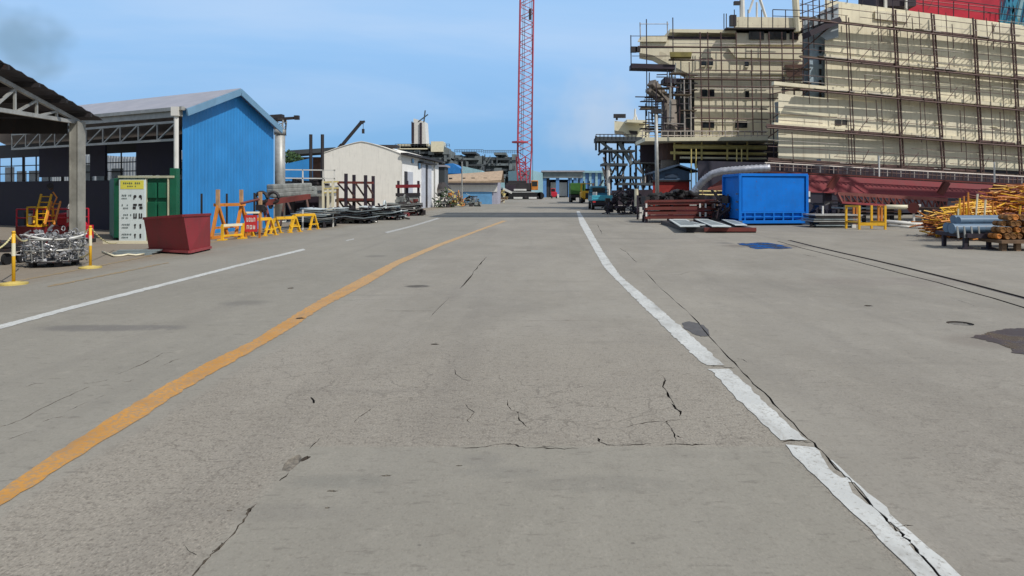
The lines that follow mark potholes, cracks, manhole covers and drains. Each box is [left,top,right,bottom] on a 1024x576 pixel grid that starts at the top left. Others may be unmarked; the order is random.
crack [184,504,256,576]
crack [598,378,714,446]
crack [4,355,178,439]
pothole [282,455,301,472]
crack [455,401,570,449]
